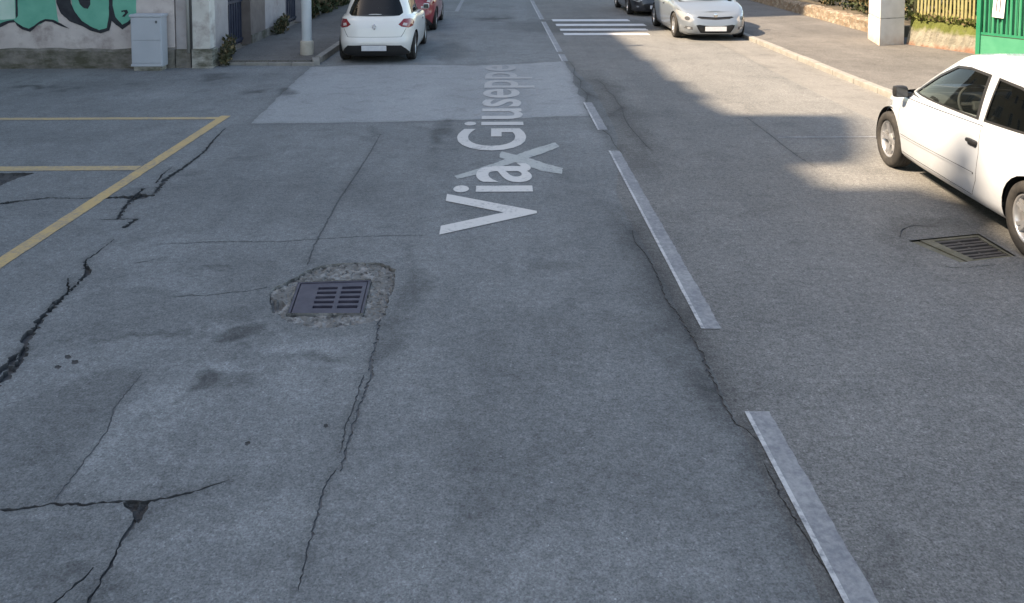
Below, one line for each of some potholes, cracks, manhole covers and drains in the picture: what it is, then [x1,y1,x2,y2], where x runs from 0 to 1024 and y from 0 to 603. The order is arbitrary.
crack [0,373,227,603]
pothole [123,500,152,523]
crack [0,128,226,386]
crack [298,320,381,590]
crack [137,137,424,265]
crack [632,231,844,603]
